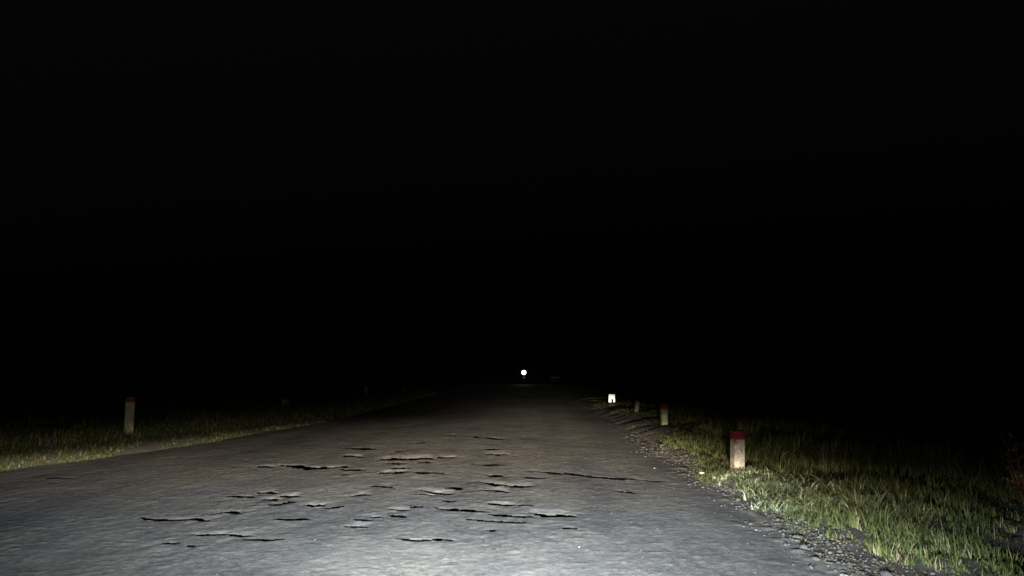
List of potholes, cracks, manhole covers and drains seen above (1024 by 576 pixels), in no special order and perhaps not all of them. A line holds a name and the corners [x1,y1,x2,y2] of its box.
crack [524,471,666,494]
pothole [479,481,533,493]
crack [233,448,535,542]
pothole [420,489,458,502]
pothole [280,464,360,476]
